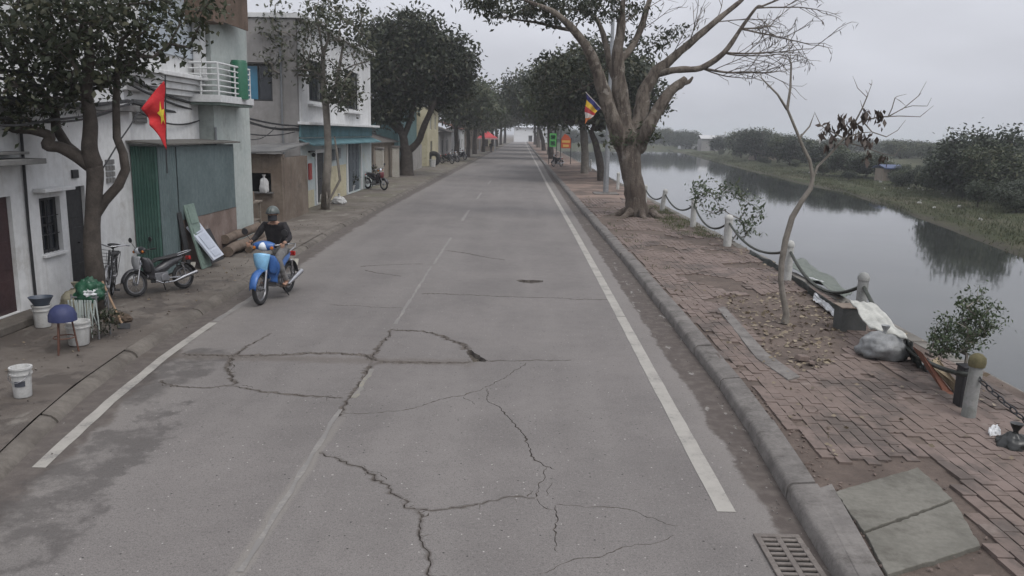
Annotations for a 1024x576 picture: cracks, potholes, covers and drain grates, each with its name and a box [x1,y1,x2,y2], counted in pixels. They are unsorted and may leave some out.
pothole [466,349,488,362]
drain grate [753,533,827,576]
crack [319,363,679,576]
